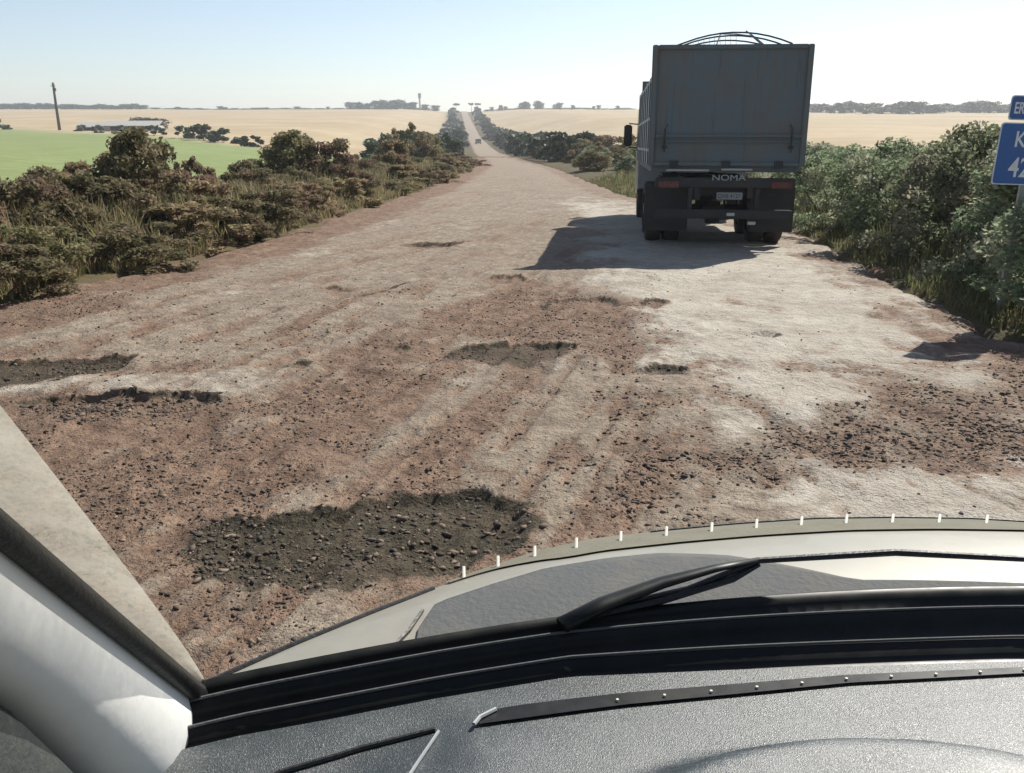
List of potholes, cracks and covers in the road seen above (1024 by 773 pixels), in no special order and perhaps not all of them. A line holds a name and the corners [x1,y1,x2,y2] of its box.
pothole [187,486,542,593]
pothole [0,353,139,388]
pothole [441,340,578,369]
pothole [637,297,671,309]
pothole [399,240,472,249]
pothole [483,273,531,286]
pothole [510,296,635,322]
pothole [1,387,222,424]
pothole [637,362,691,376]
pothole [747,330,788,339]
